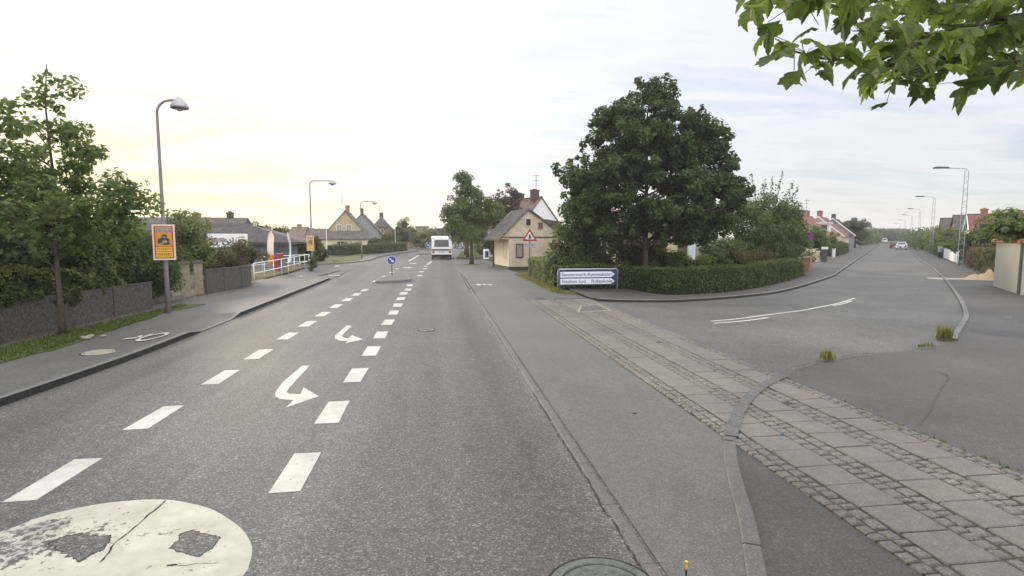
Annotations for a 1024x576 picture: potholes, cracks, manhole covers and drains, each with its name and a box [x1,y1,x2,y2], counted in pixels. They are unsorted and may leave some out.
manhole cover [577,304,612,313]
manhole cover [548,557,649,576]
crack [919,371,949,425]
crack [97,499,167,563]
